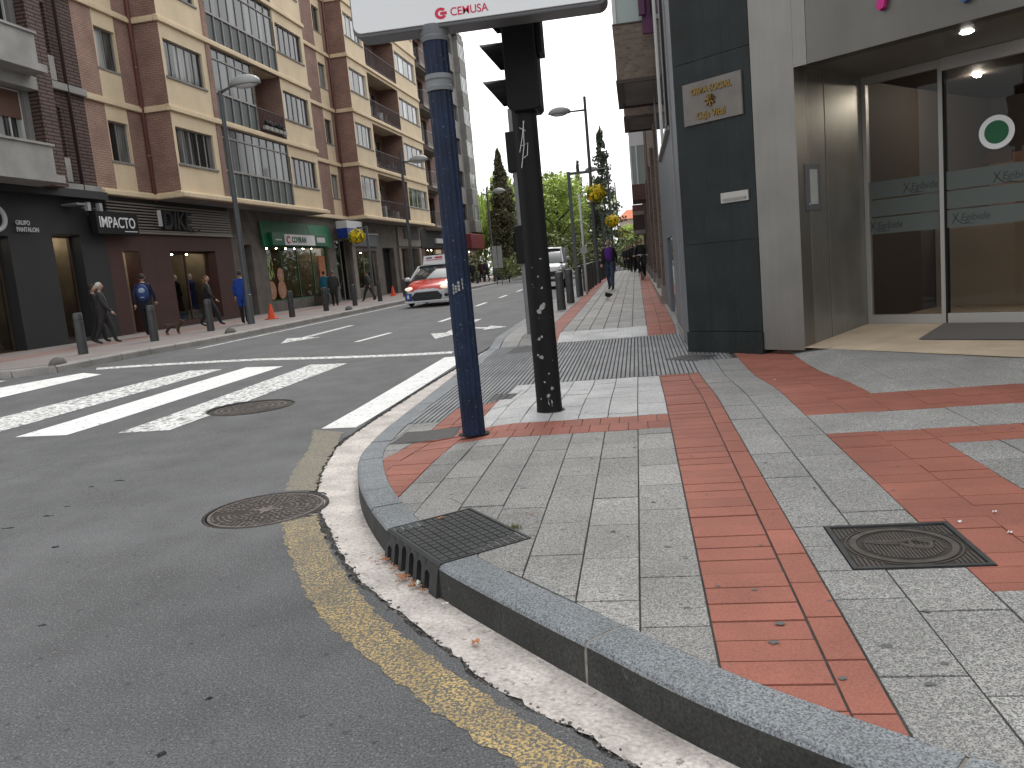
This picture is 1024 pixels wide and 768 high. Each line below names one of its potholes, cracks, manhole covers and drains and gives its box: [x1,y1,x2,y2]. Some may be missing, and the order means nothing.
drain grate [385,508,531,598]
manhole cover [206,400,295,416]
manhole cover [202,492,329,529]
manhole cover [824,521,997,571]
